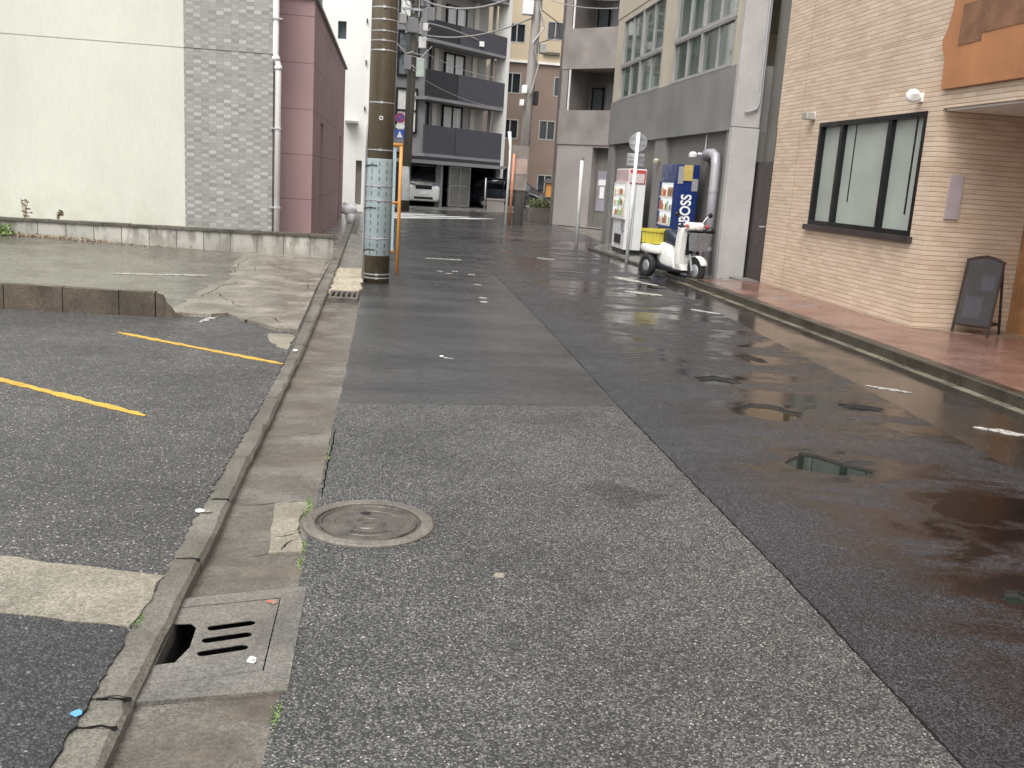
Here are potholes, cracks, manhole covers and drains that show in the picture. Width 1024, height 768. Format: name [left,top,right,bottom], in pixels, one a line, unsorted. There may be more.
pothole [838,403,883,412]
crack [202,259,309,322]
pothole [784,452,877,475]
drain grate [328,290,360,303]
manhole cover [302,500,434,548]
crack [274,429,336,497]
pothole [738,403,802,421]
pothole [695,375,742,385]
pothole [734,355,768,364]
